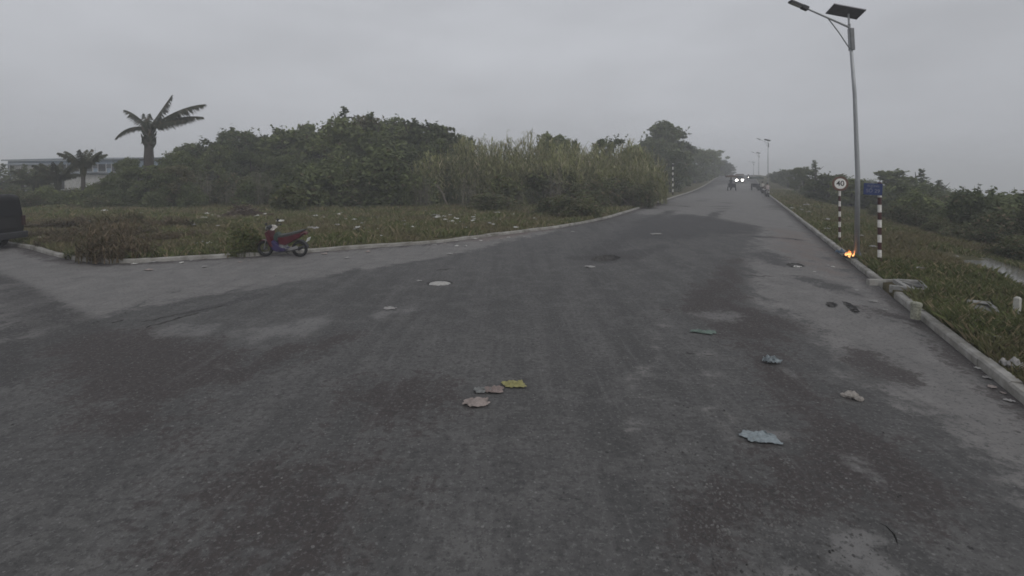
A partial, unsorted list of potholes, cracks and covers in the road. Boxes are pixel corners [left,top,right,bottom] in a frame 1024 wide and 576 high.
crack [143,305,224,328]
